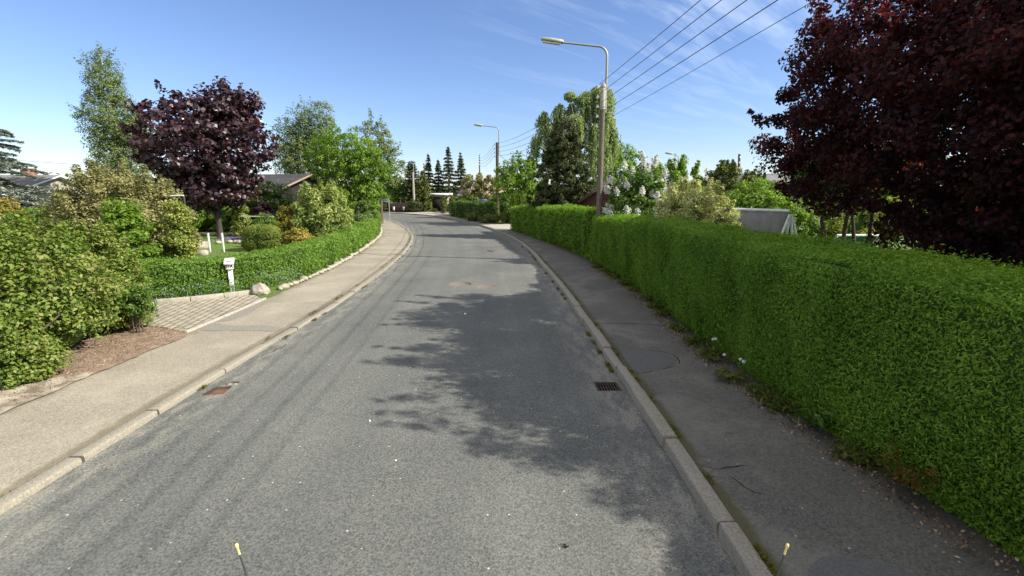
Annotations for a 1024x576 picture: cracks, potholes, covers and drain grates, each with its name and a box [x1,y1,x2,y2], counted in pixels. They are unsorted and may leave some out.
drain grate [594,382,622,391]
crack [705,465,765,495]
